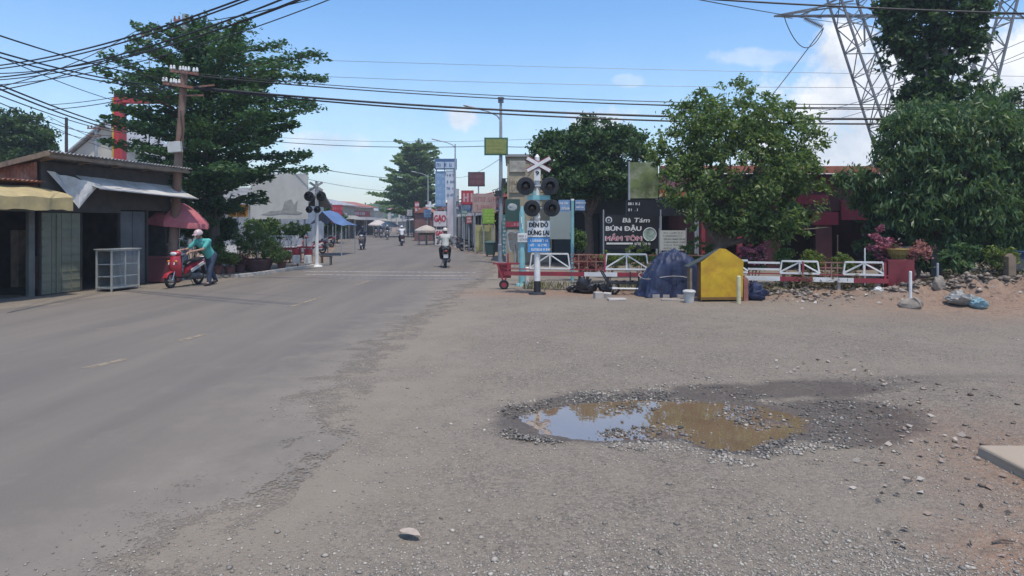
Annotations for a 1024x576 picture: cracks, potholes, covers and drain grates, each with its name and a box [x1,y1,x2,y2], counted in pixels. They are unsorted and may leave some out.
pothole [485,375,907,461]
